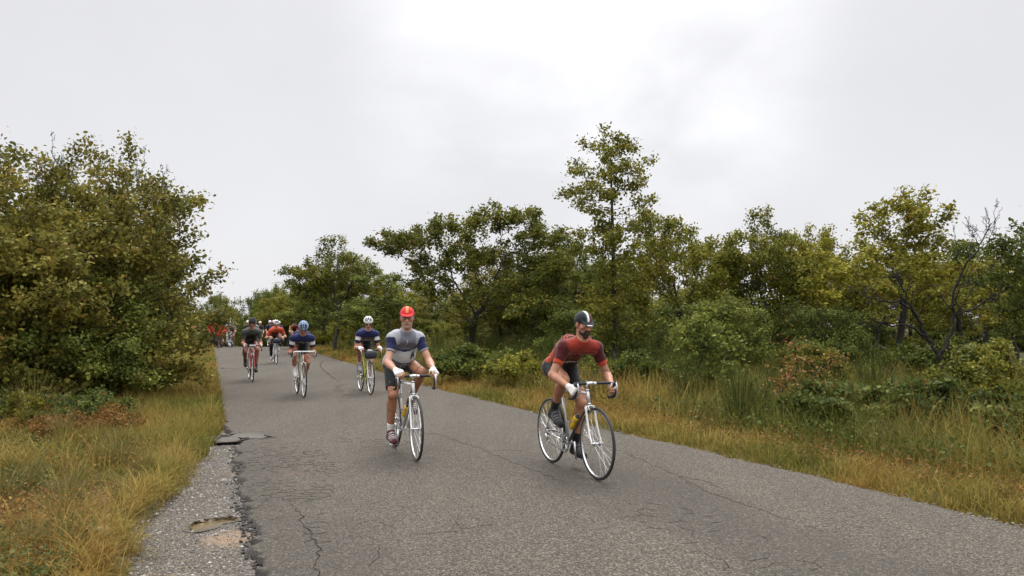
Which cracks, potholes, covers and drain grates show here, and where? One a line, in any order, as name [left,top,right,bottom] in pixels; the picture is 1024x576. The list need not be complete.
pothole [183,515,241,533]
crack [628,501,821,576]
crack [247,431,556,576]
pothole [205,432,277,446]
